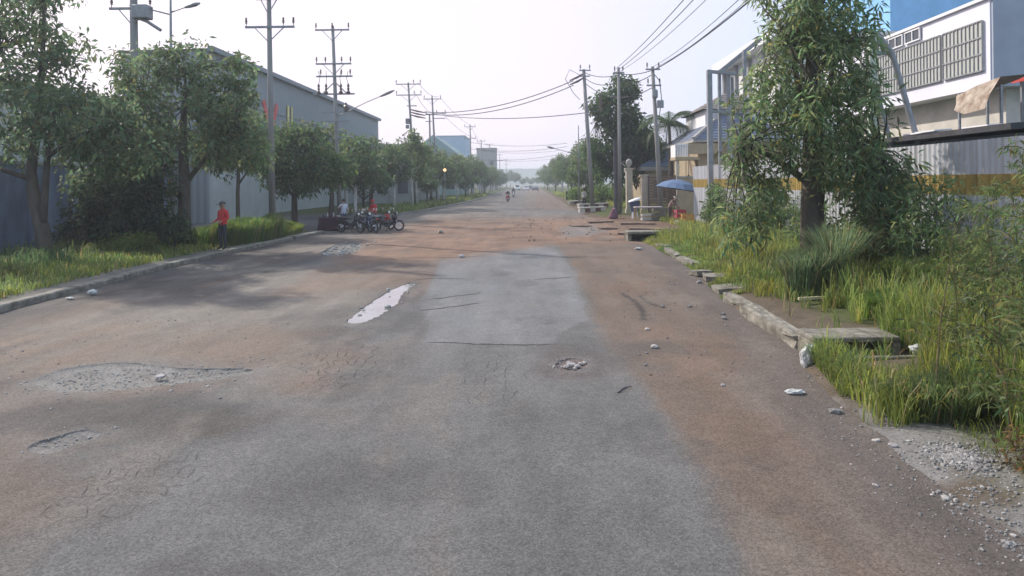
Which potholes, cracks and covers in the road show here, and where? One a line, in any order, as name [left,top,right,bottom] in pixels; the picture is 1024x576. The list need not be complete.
pothole [21,425,119,457]
pothole [549,357,589,371]
crack [296,346,399,389]
pothole [320,241,377,256]
crack [416,278,479,311]
crack [31,444,217,528]
pothole [1,358,271,396]
crack [464,354,525,412]
pothole [346,281,420,324]
